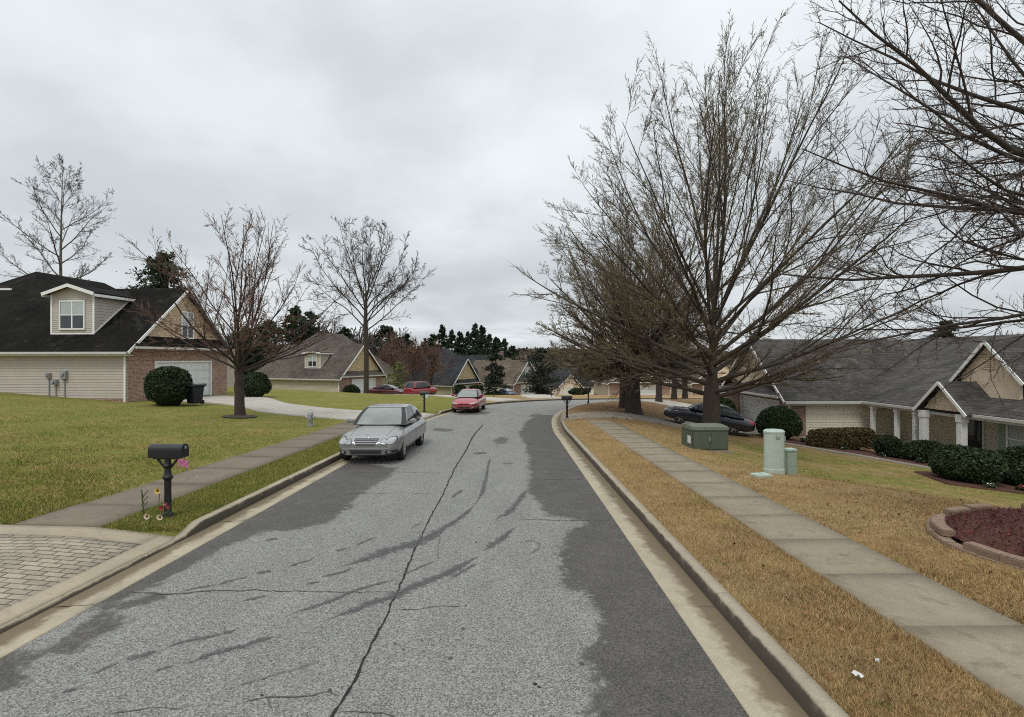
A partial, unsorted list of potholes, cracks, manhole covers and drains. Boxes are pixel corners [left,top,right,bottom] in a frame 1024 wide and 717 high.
crack [130,425,483,717]
